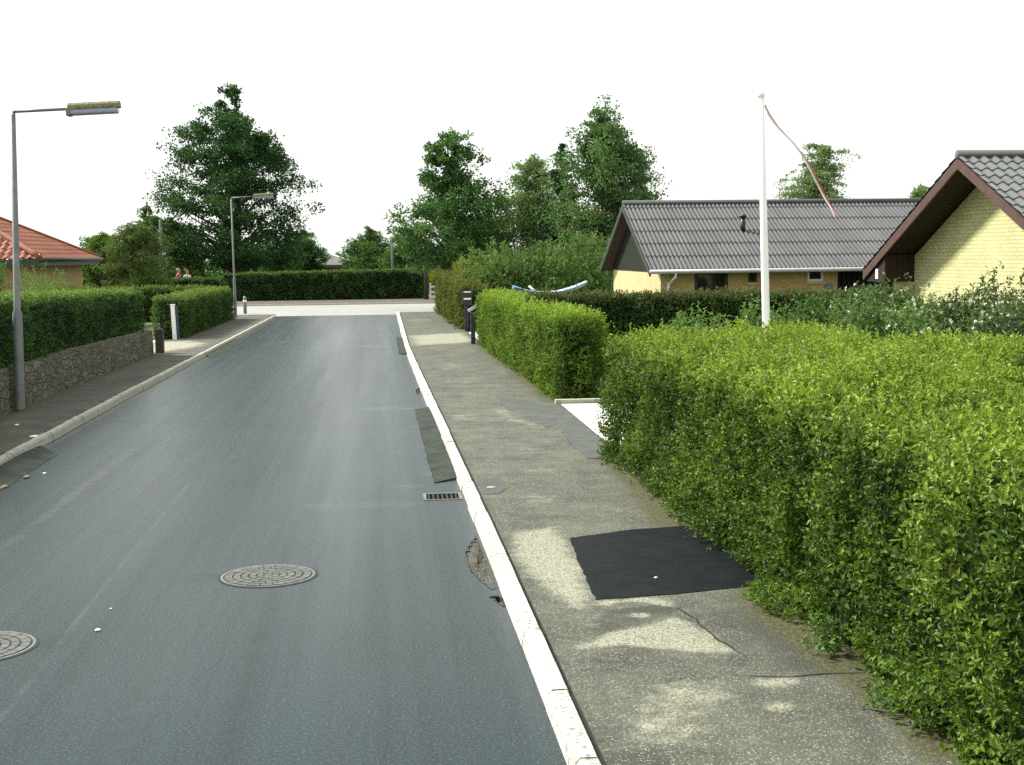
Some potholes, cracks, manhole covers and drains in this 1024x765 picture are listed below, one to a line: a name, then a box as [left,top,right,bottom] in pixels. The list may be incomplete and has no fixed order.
manhole cover [0,630,40,661]
crack [674,606,746,656]
manhole cover [218,564,318,588]
pothole [464,533,498,589]
drain grate [423,492,463,501]
